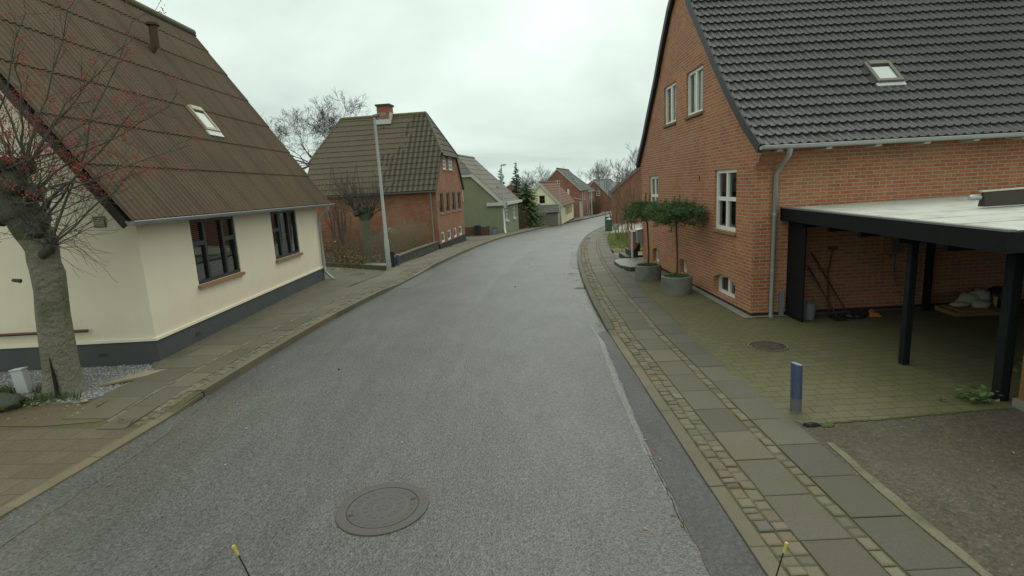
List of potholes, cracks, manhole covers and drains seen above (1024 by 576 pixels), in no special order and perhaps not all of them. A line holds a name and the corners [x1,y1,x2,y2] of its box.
manhole cover [747,340,788,352]
manhole cover [335,482,429,536]
